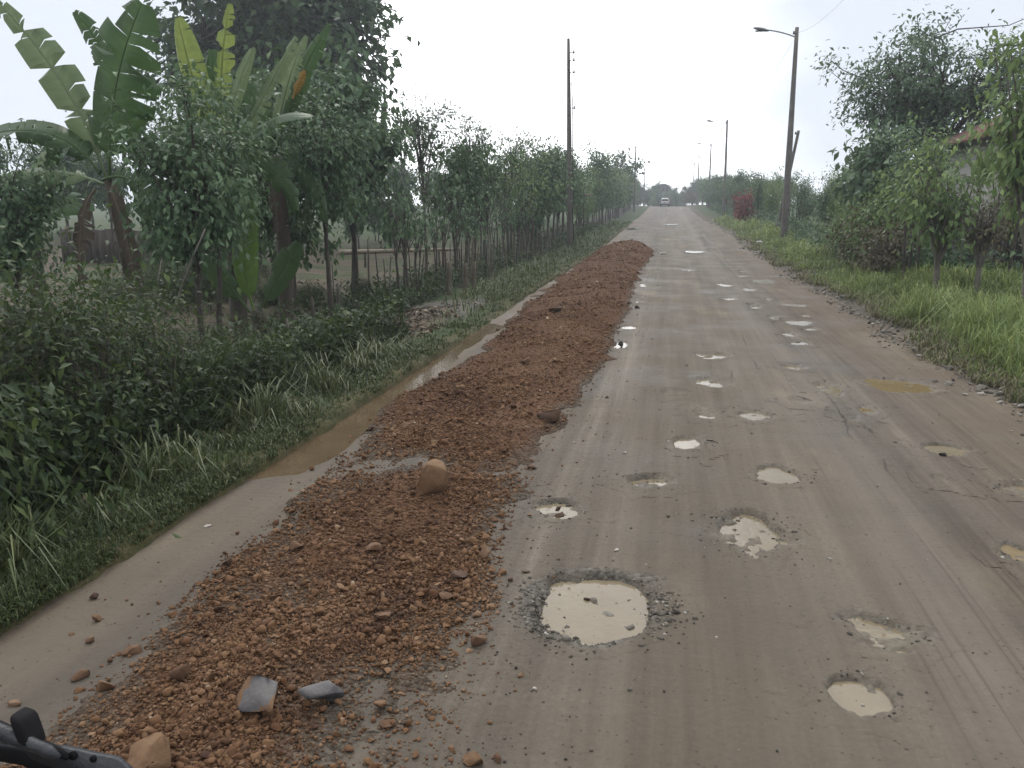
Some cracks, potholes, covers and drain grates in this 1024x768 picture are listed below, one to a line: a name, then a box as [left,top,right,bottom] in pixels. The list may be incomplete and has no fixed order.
crack [792,392,875,438]
pothole [502,557,704,660]
pothole [780,589,974,675]
pothole [610,336,646,355]
